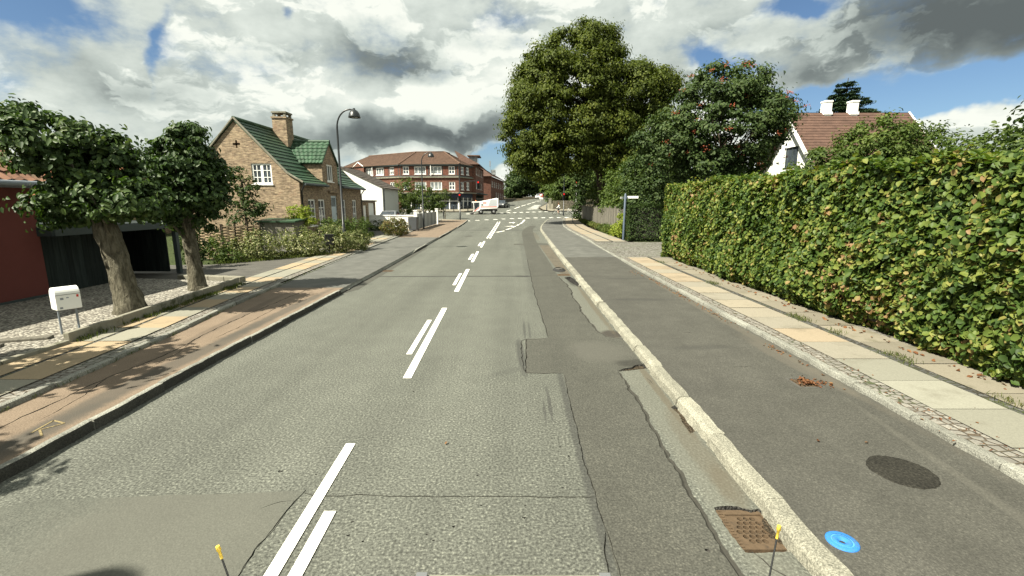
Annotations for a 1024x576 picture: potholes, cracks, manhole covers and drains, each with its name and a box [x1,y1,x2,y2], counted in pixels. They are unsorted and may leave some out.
crack [238,366,786,576]
drain grate [716,510,787,553]
